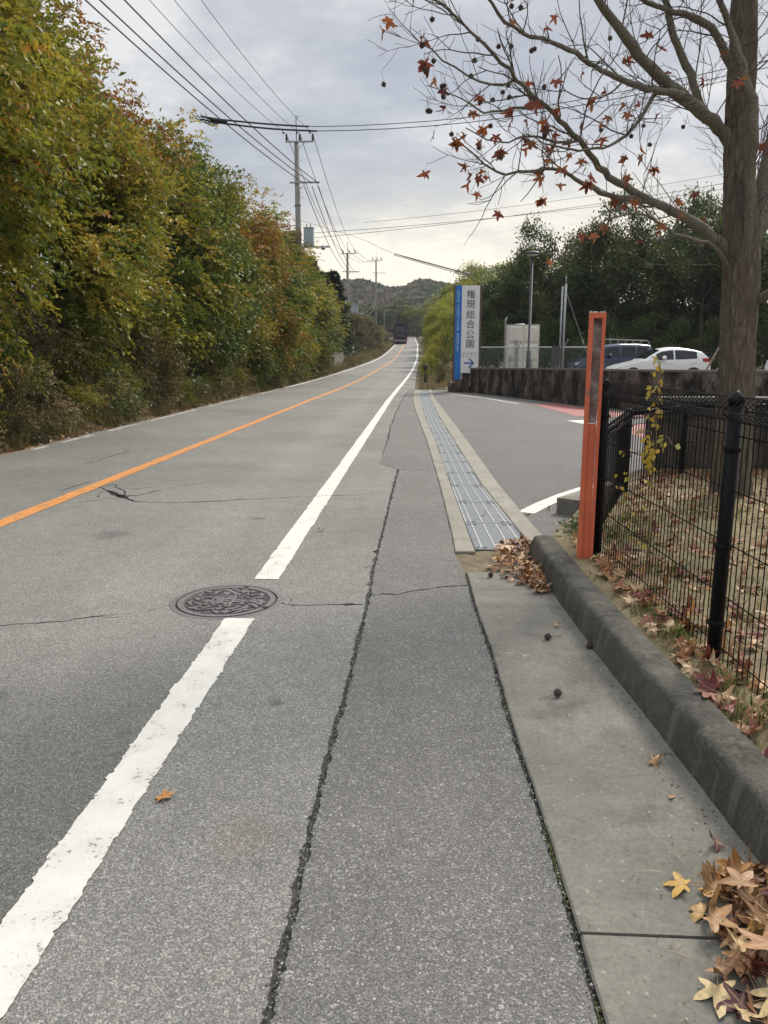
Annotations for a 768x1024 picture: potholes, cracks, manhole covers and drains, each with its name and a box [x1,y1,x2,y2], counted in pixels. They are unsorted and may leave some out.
drain grate [465,523,529,552]
crack [64,391,709,1024]
manhole cover [169,584,283,620]
drain grate [451,486,495,503]
drain grate [447,472,482,486]
drain grate [440,453,467,462]
drain grate [443,462,474,473]
drain grate [437,445,461,453]
drain grate [457,502,511,524]
crack [0,605,169,626]
